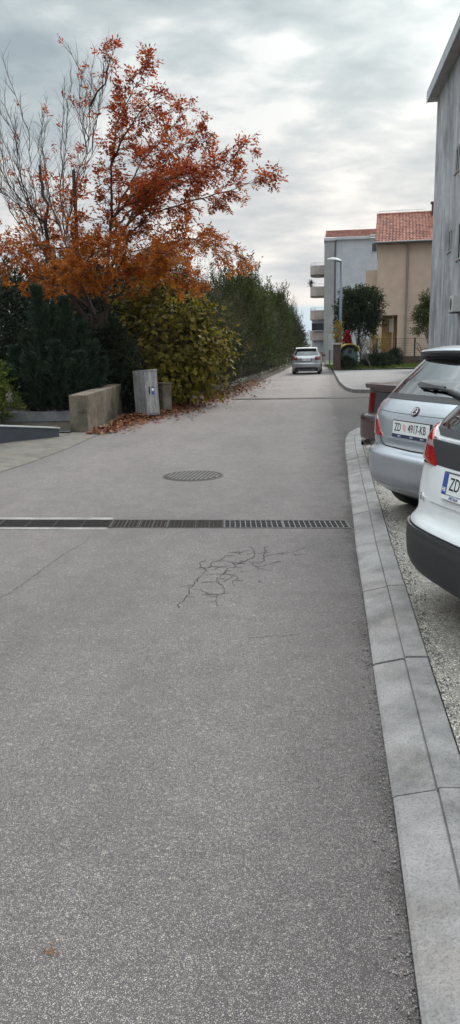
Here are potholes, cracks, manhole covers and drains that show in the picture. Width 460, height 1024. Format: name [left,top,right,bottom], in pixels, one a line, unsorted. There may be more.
crack [177,536,305,609]
manhole cover [163,471,224,481]
